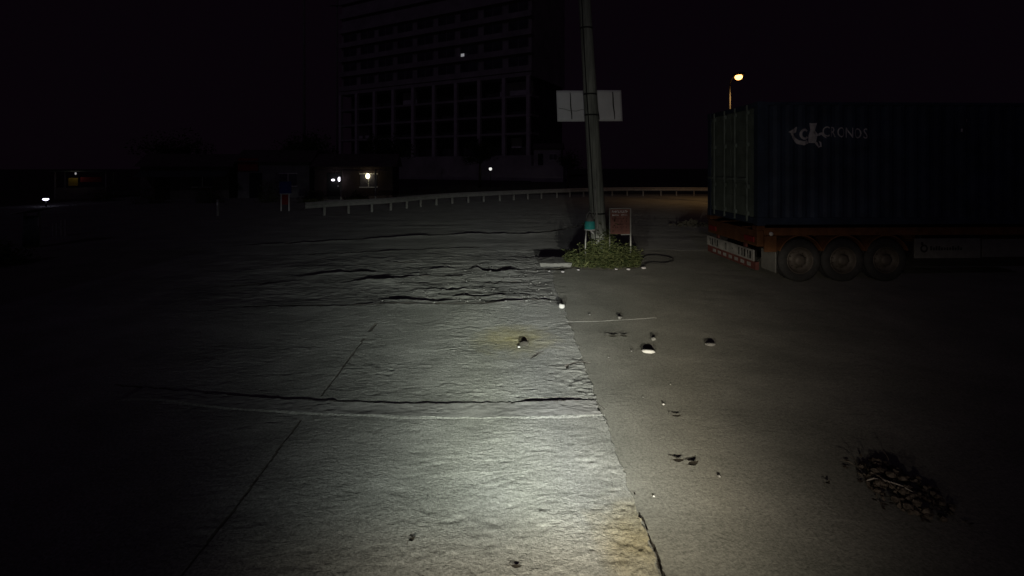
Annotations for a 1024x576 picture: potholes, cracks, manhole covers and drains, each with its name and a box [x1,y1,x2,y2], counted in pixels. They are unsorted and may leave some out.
crack [634,492,666,576]
crack [240,281,559,307]
crack [250,226,578,277]
